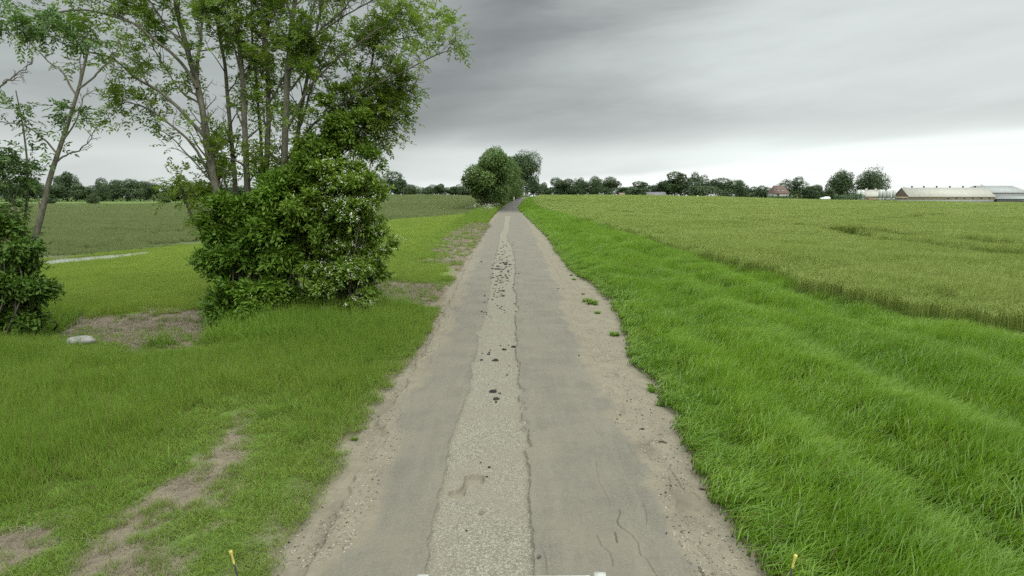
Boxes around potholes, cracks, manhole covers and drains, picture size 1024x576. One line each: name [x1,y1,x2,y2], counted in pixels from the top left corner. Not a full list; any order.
pothole [447,474,485,499]
crack [595,460,657,576]
